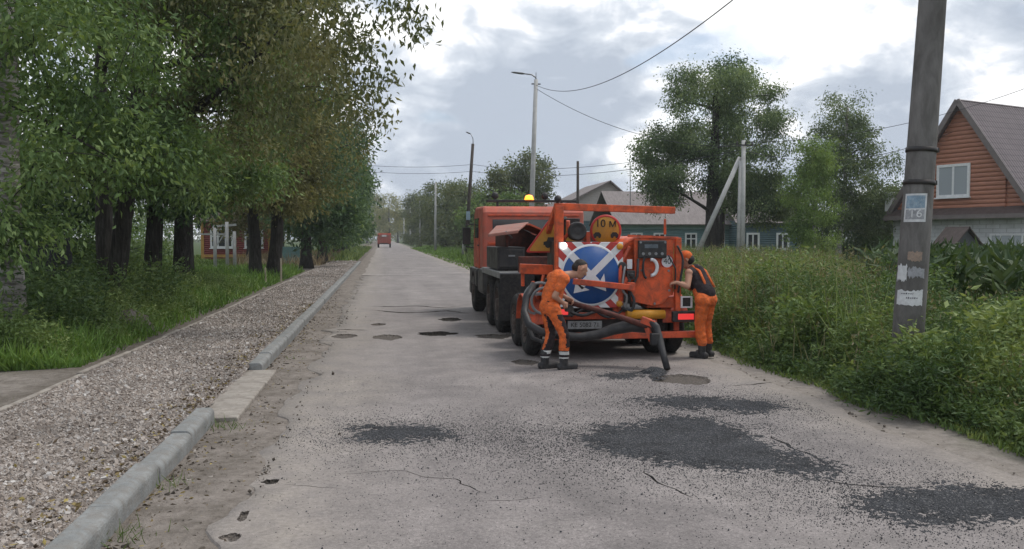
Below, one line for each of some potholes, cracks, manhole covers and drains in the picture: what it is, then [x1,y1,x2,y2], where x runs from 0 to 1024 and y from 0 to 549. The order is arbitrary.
crack [771,436,886,488]
pothole [218,533,241,542]
crack [355,470,542,501]
crack [643,470,690,497]
